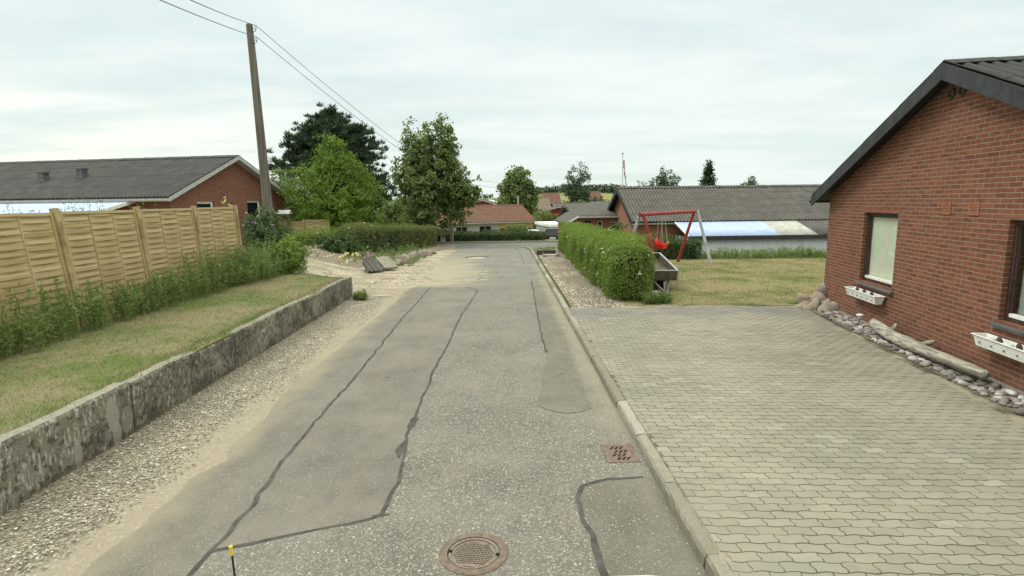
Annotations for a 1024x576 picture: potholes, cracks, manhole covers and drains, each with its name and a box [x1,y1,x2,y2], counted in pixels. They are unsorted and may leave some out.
manhole cover [439,532,508,576]
drain grate [600,444,641,463]
